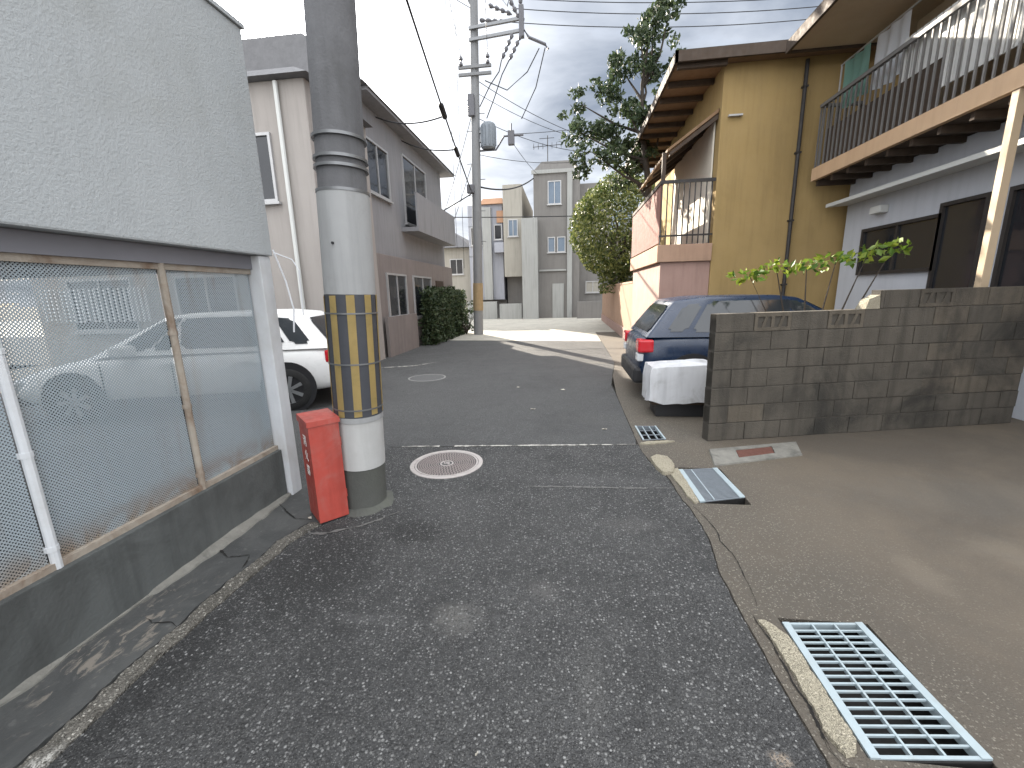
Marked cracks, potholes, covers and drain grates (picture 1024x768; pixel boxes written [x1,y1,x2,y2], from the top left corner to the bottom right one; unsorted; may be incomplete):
manhole cover [408,374,446,382]
manhole cover [410,450,483,479]
drain grate [635,426,666,441]
drain grate [780,622,993,768]
